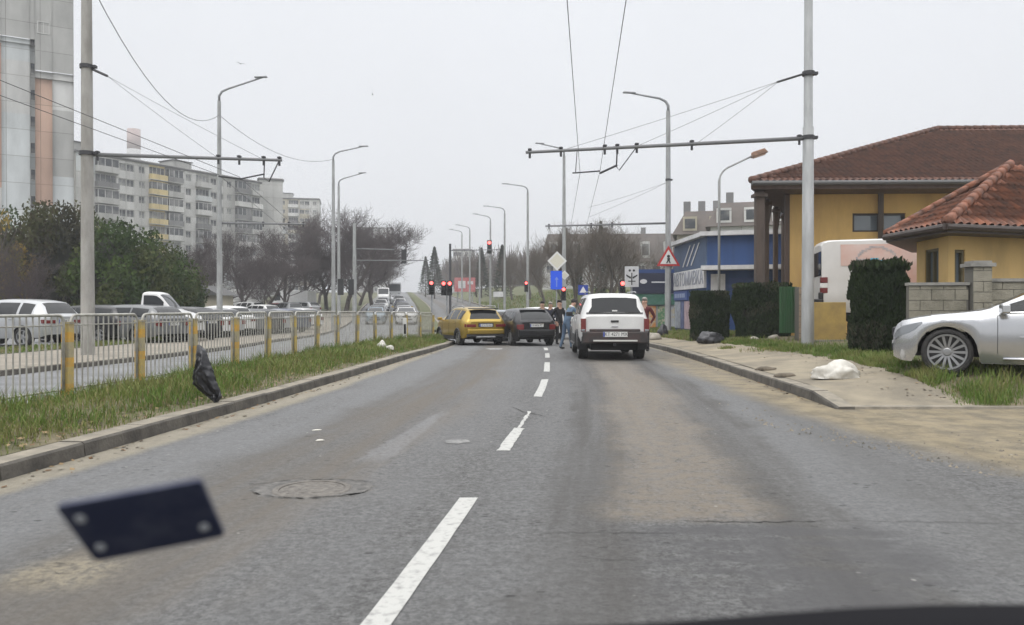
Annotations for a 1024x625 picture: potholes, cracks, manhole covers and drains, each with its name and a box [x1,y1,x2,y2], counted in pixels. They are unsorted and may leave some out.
manhole cover [248,479,376,499]
